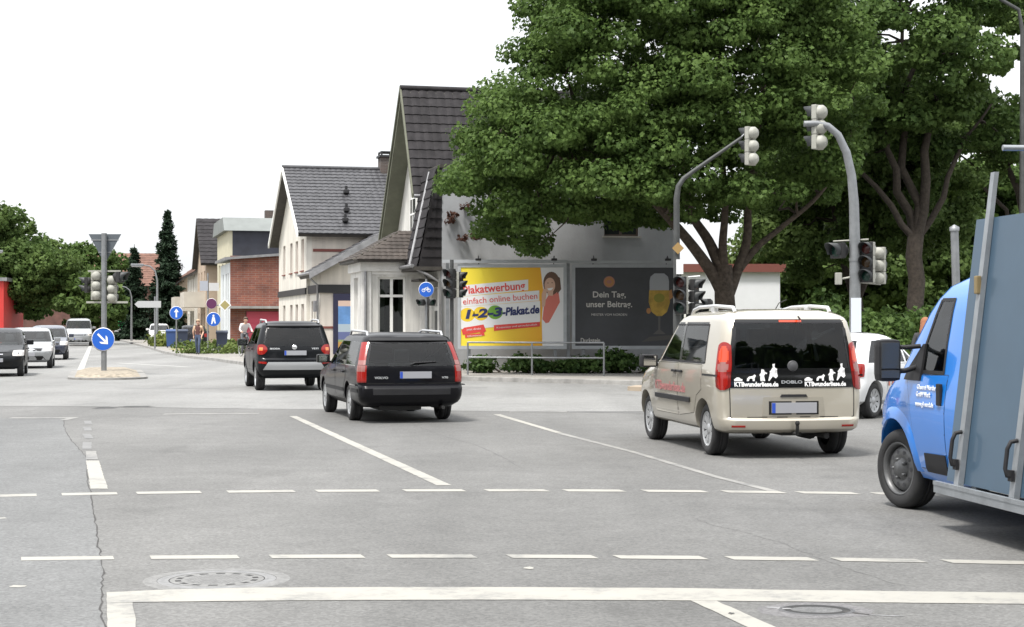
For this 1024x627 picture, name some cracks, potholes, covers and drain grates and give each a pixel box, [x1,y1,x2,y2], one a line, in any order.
crack [63,418,107,627]
utility cover [778,604,855,615]
manhole cover [143,569,290,590]
